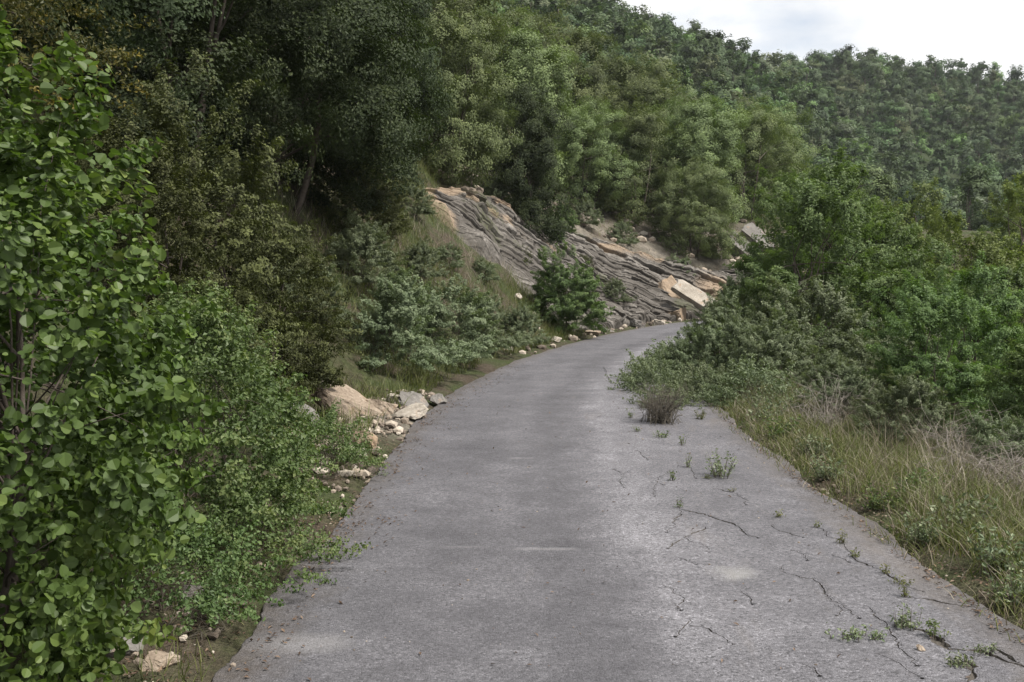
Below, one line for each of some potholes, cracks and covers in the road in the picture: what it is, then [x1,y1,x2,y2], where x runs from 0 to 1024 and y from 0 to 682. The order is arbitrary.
crack [612,450,1024,682]
